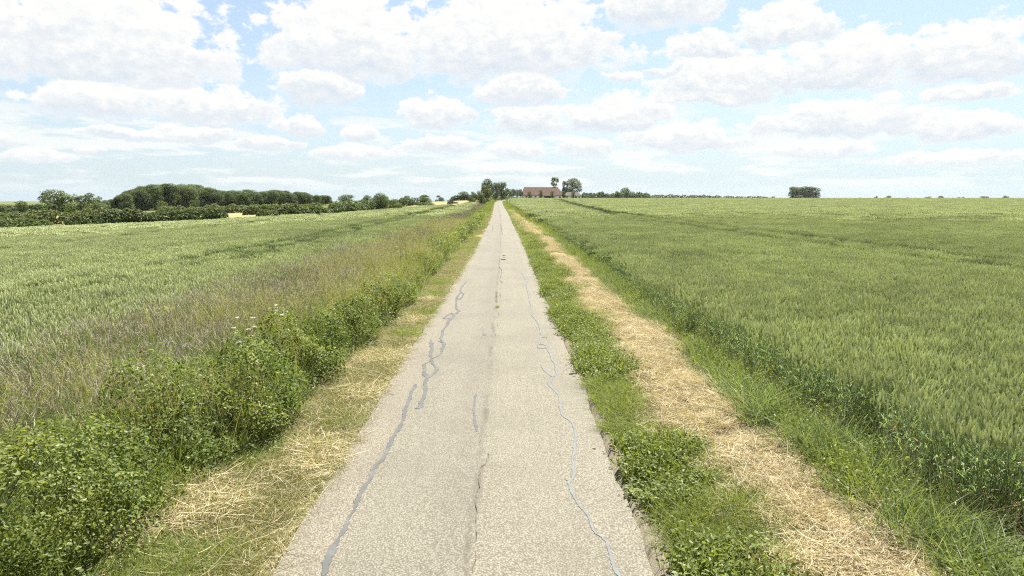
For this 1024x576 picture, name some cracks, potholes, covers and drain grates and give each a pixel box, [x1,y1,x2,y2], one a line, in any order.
crack [472,392,489,575]
